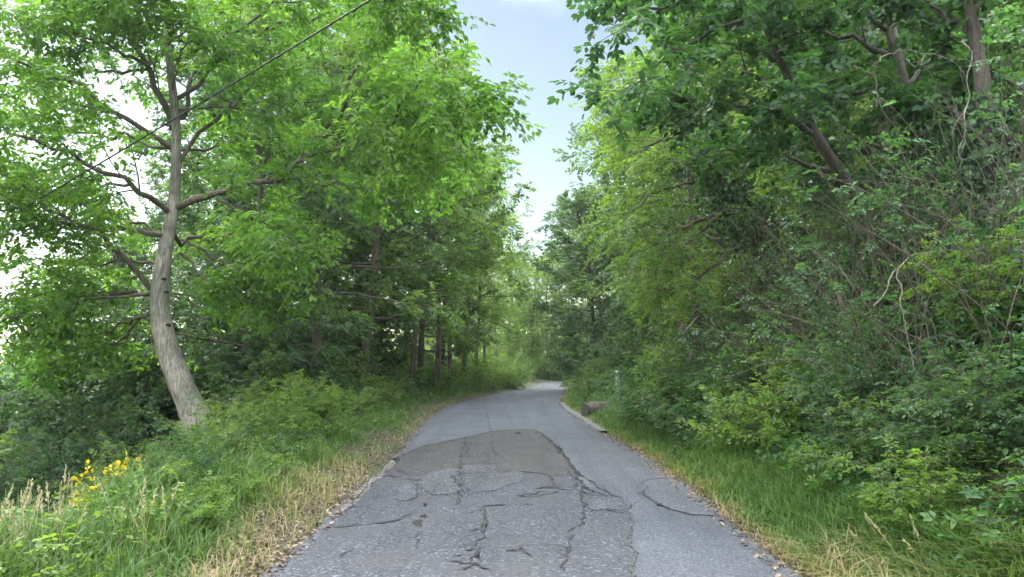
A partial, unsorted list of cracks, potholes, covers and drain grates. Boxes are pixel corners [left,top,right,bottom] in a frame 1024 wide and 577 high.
crack [330,408,707,577]
